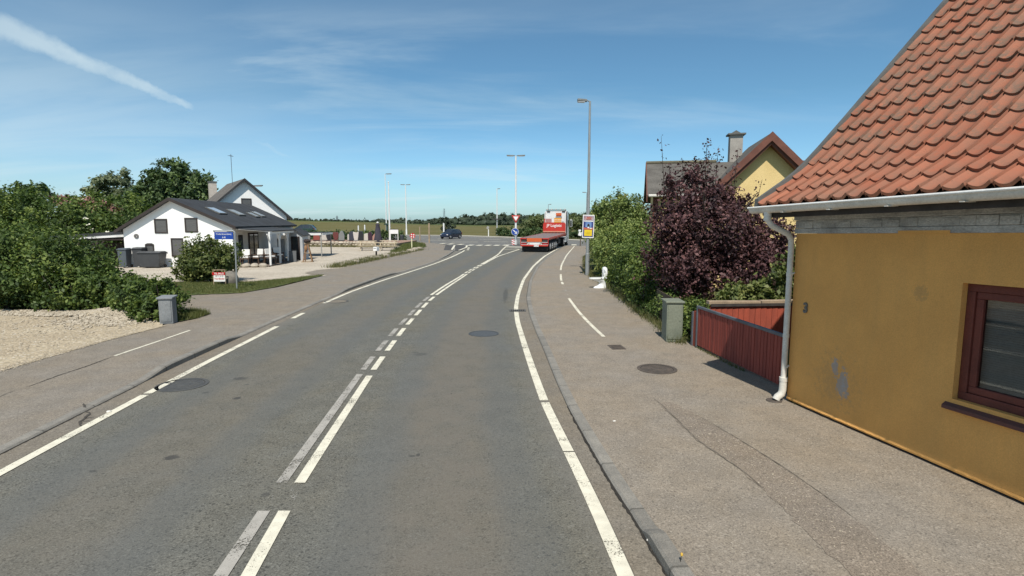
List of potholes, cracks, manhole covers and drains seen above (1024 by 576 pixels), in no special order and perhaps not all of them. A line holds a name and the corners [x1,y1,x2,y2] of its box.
crack [1,383,142,454]
manhole cover [154,378,209,392]
manhole cover [637,364,677,374]
